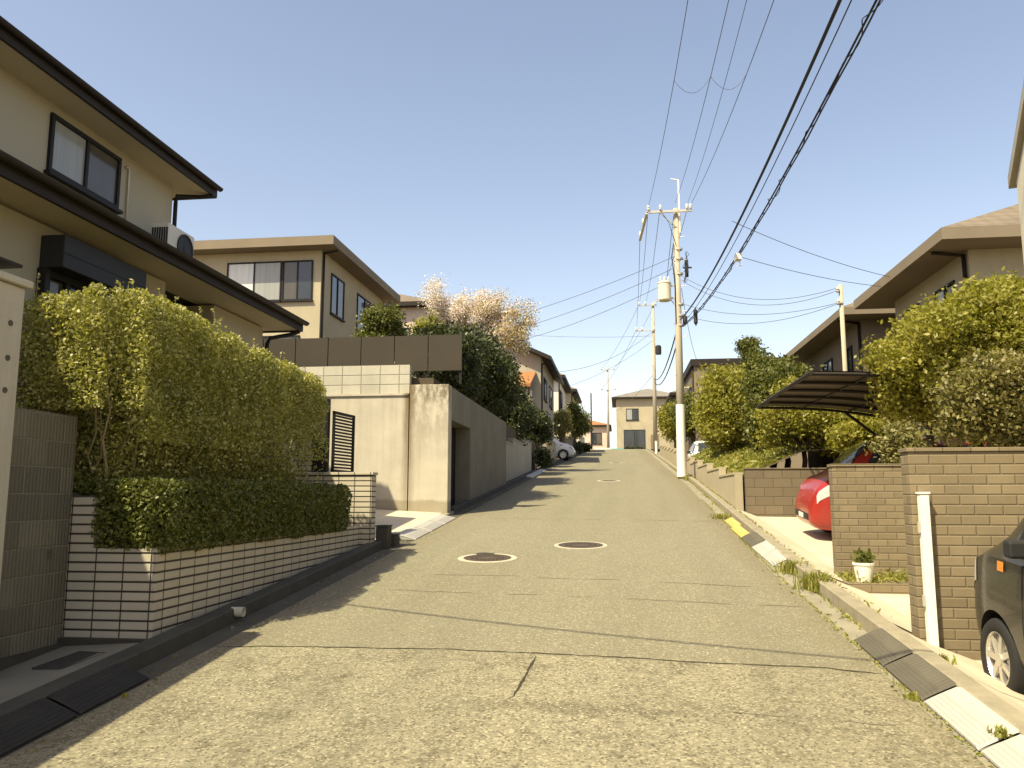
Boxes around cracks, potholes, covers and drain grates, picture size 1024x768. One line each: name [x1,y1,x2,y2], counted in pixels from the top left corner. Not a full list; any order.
manhole cover [554,541,608,549]
manhole cover [458,552,517,563]
crack [508,656,536,699]
